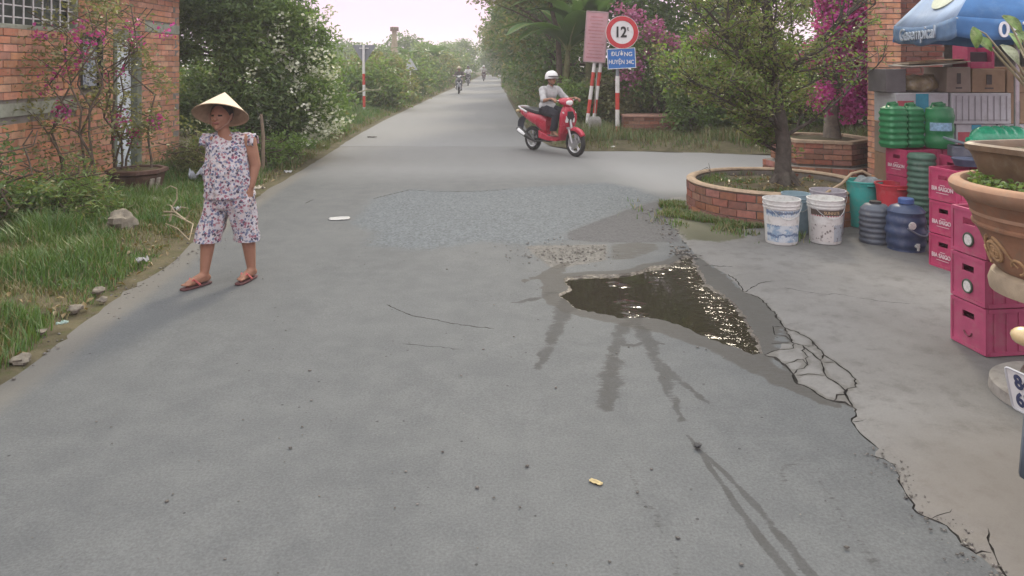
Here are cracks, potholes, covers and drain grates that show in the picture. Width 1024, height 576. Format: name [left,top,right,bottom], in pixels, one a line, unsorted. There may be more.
crack [704,265,1007,576]
pothole [558,255,763,354]
crack [388,305,488,328]
